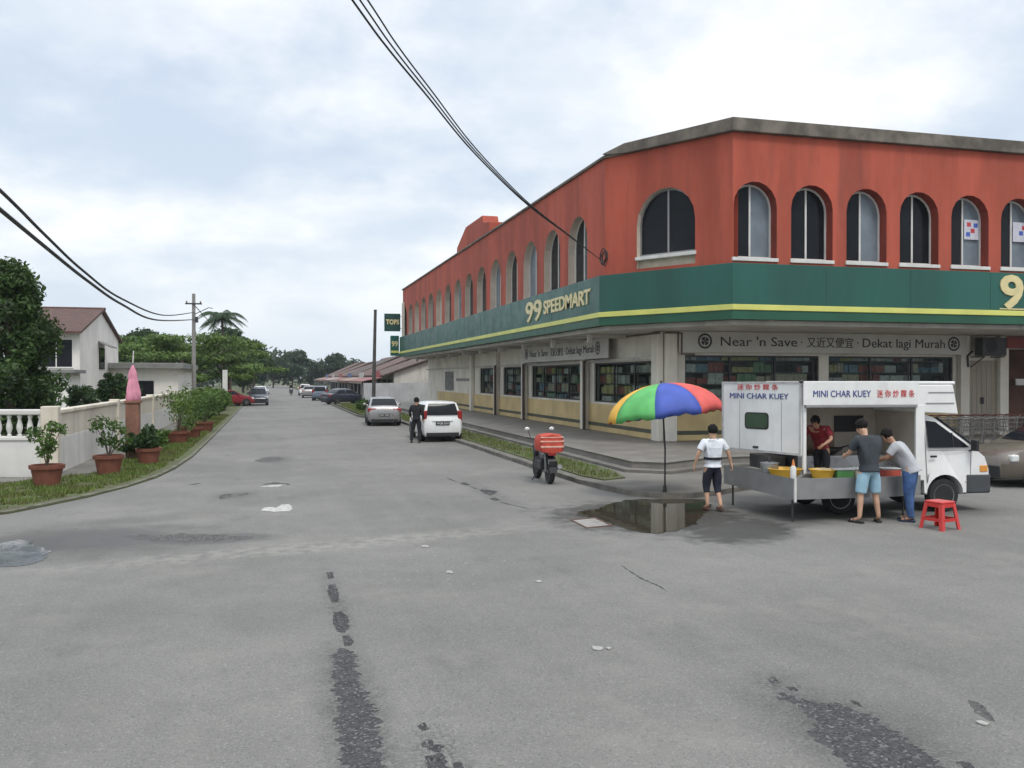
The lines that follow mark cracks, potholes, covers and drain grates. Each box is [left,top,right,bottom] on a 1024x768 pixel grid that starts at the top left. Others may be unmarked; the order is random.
manhole cover [569,517,613,529]
crack [621,565,668,592]
